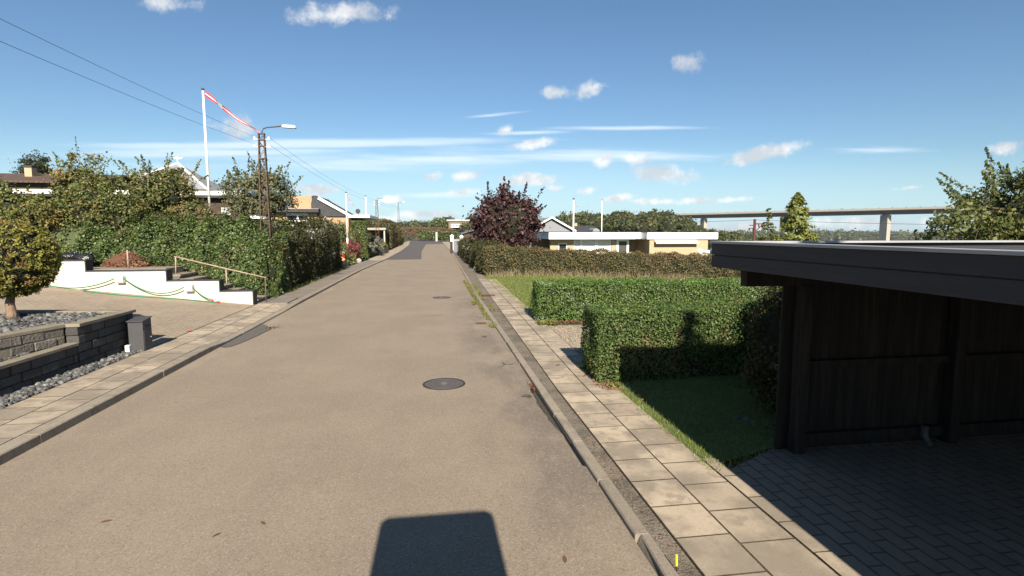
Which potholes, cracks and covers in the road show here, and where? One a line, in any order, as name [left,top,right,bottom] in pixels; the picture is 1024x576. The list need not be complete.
manhole cover [423,378,465,390]
